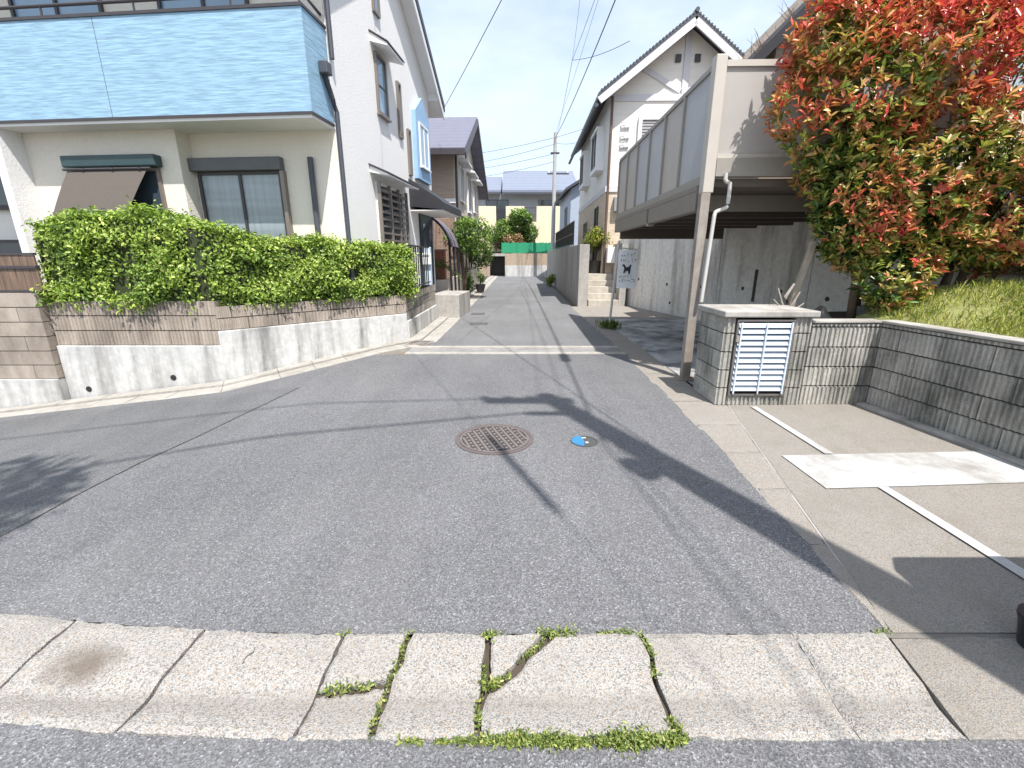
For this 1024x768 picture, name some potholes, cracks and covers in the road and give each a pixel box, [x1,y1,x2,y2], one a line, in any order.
manhole cover [455,424,534,455]
utility cover [571,436,598,447]
